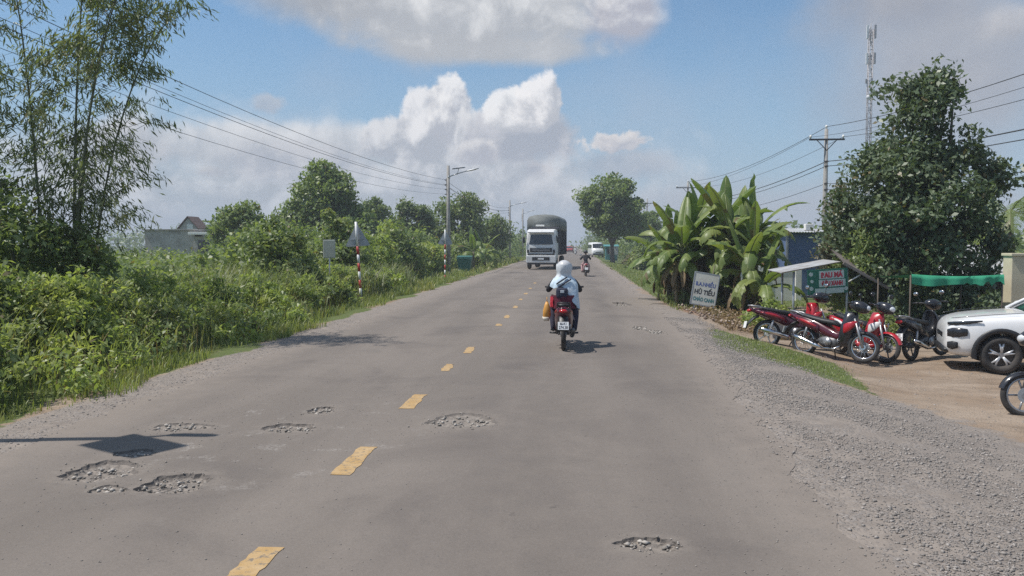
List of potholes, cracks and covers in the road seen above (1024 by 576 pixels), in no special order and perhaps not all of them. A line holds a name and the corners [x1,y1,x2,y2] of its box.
pothole [408,407,517,434]
pothole [300,406,344,415]
pothole [56,454,167,483]
pothole [261,421,321,437]
pothole [605,534,705,554]
pothole [137,420,216,432]
pothole [84,484,139,494]
pothole [123,471,212,494]
pothole [112,448,160,457]
